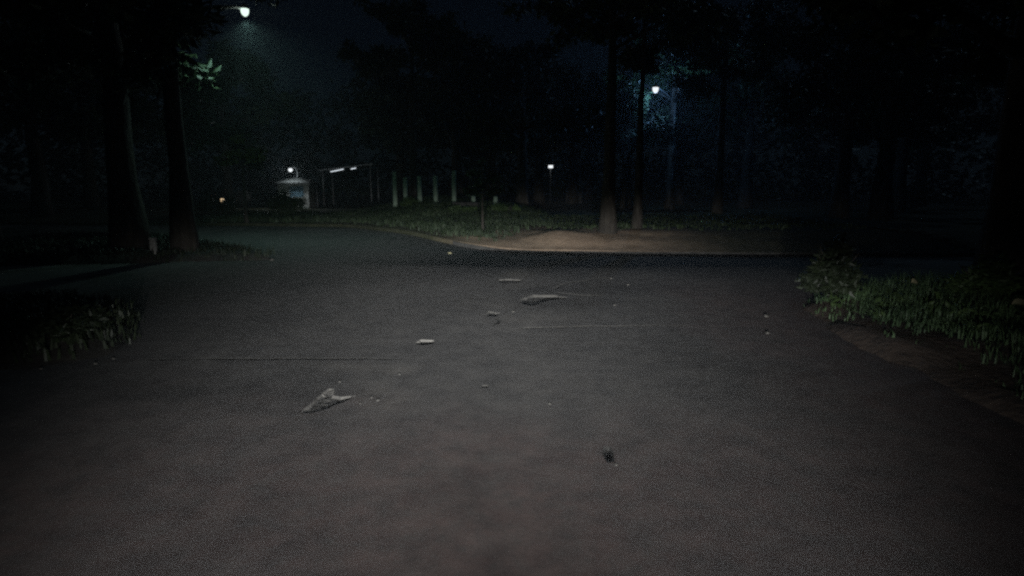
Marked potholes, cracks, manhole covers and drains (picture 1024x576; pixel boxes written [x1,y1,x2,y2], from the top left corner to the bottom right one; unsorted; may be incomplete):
pothole [602,446,615,463]
